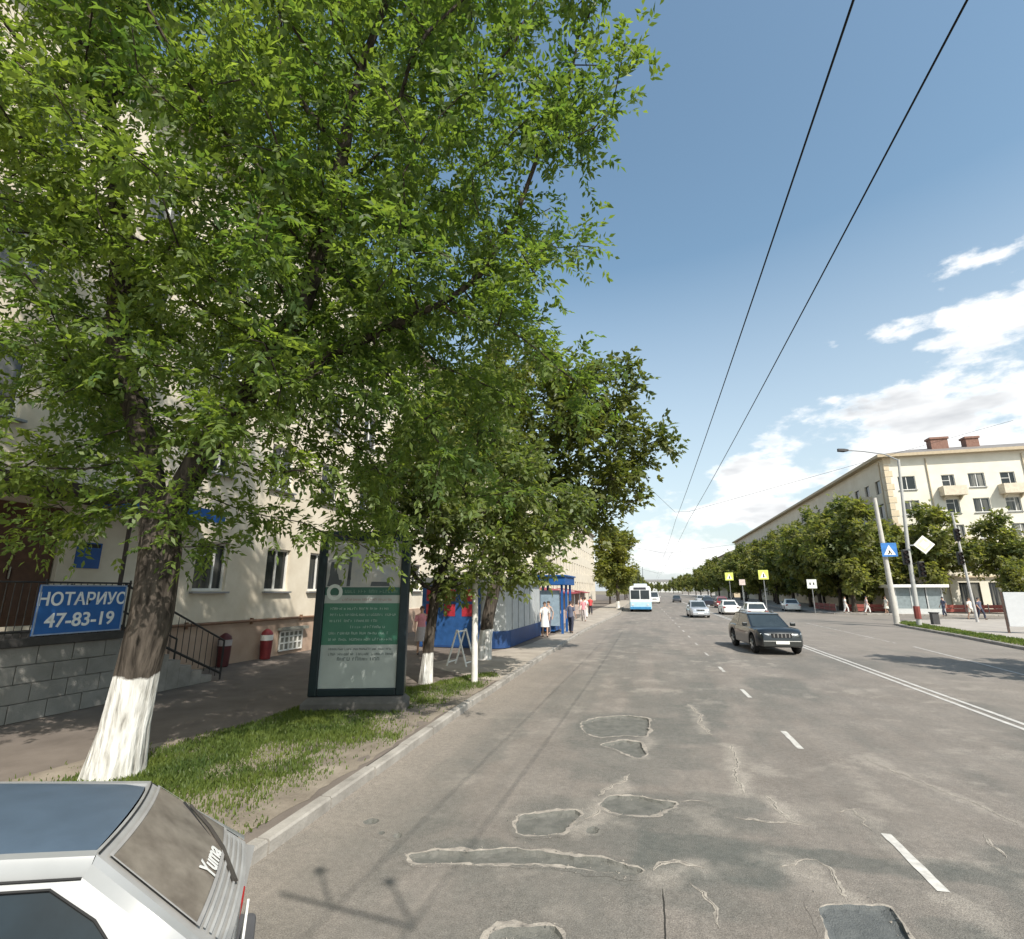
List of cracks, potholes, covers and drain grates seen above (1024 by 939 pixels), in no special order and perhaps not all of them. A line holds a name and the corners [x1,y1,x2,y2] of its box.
pothole [400,843,651,881]
pothole [507,807,588,839]
crack [687,704,712,735]
pothole [579,823,606,837]
crack [653,859,719,927]
pothole [593,790,683,818]
pothole [577,714,655,739]
pothole [470,918,574,939]
crack [737,794,809,825]
crack [780,858,849,901]
pothole [597,739,652,759]
